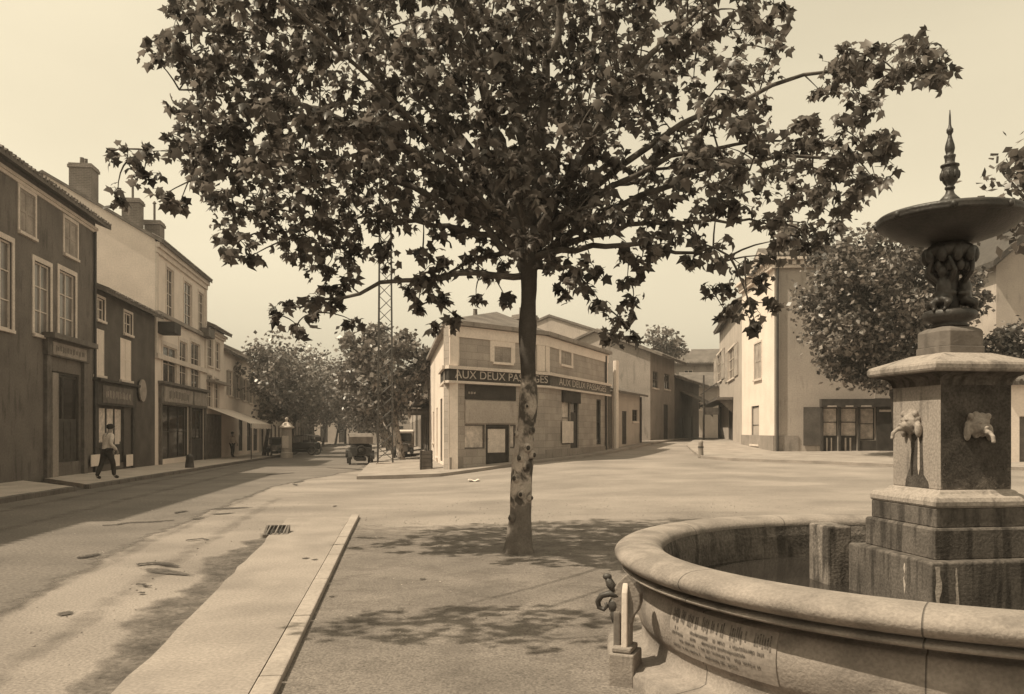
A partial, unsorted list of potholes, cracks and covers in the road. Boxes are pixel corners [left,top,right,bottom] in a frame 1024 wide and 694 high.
drain grate [263,525,290,538]
